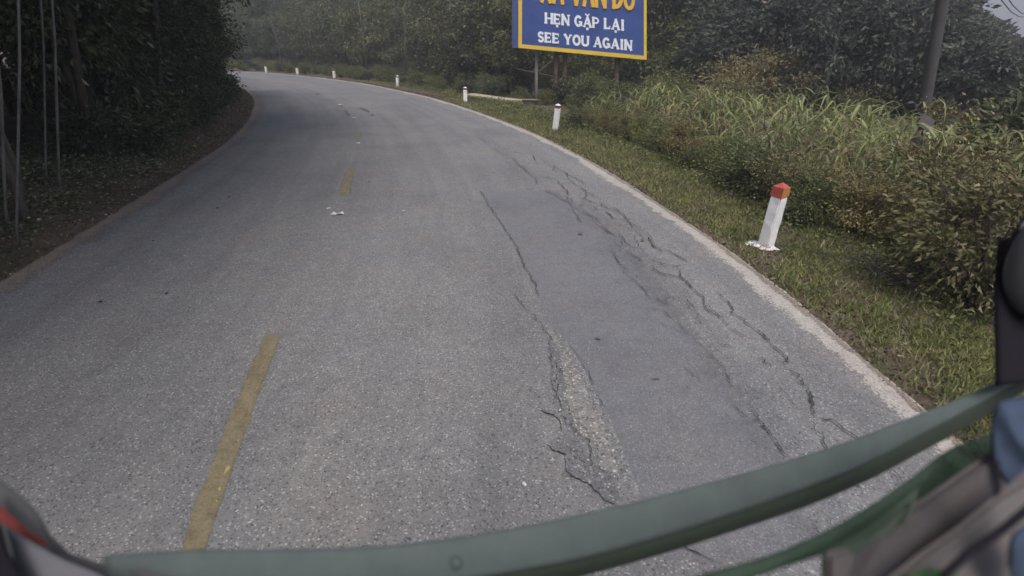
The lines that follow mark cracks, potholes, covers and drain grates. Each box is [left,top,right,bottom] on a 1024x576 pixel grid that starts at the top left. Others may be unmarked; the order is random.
crack [478,137,857,454]
